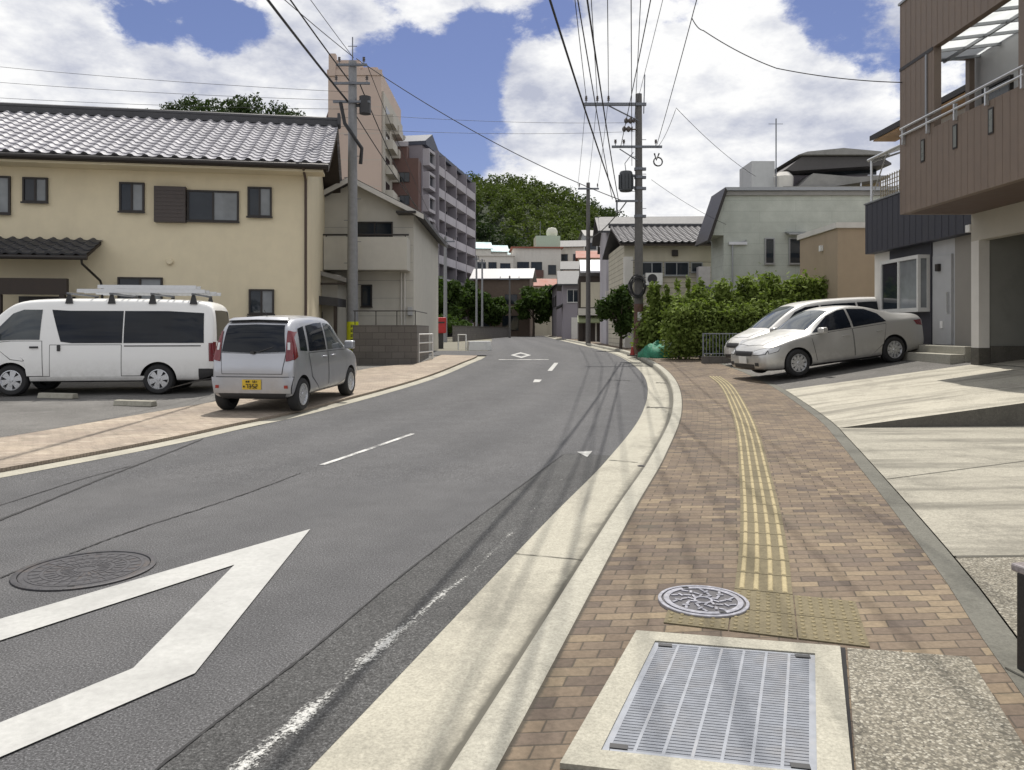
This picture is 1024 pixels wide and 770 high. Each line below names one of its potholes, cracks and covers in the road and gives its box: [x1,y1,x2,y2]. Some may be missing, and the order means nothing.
manhole cover [658,585,750,619]
drain grate [560,630,852,770]
manhole cover [9,550,157,592]
